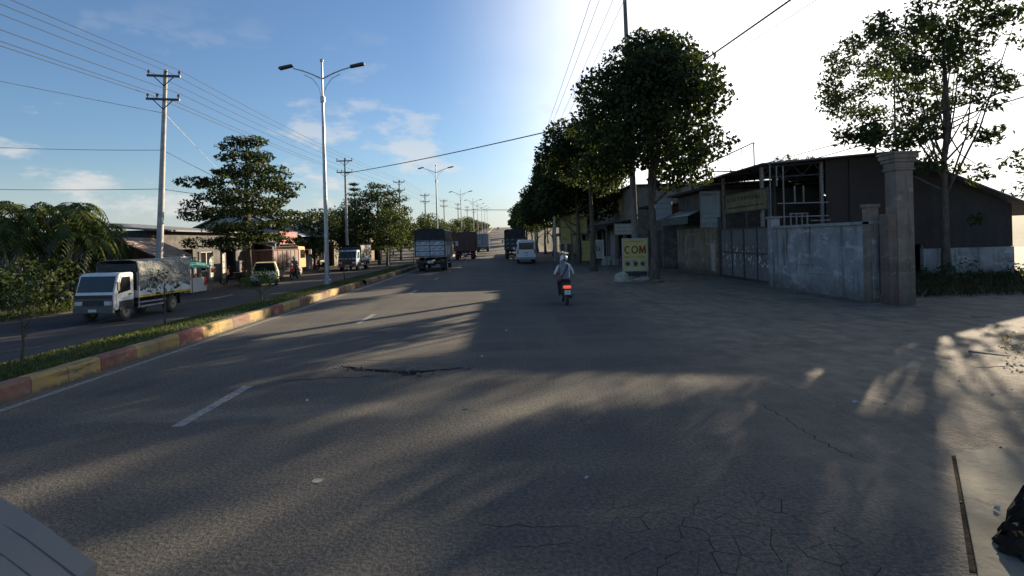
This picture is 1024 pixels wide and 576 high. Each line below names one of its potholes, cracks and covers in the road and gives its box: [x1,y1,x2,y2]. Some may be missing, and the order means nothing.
crack [480,524,581,549]
crack [757,402,855,458]
crack [278,357,434,382]
